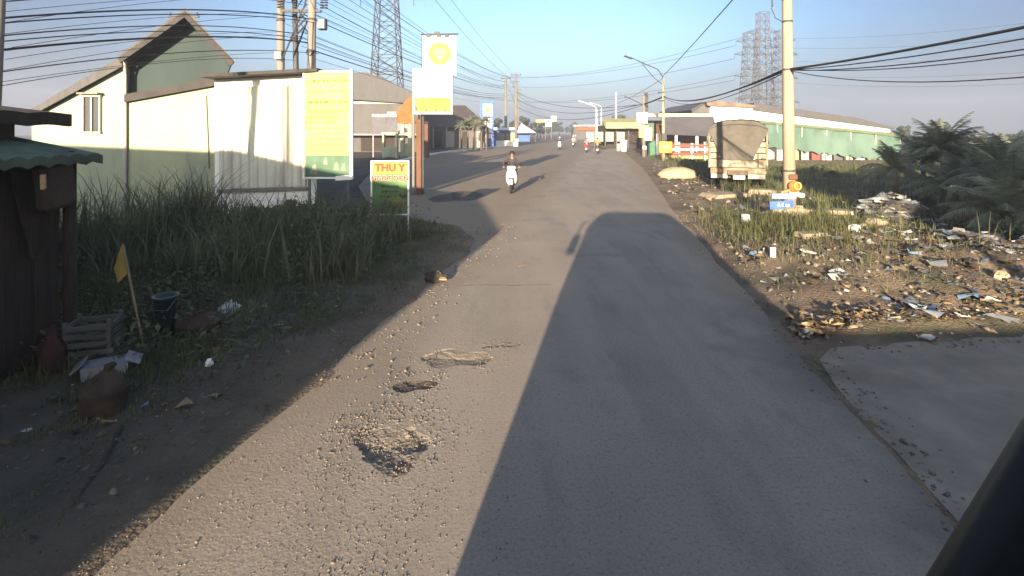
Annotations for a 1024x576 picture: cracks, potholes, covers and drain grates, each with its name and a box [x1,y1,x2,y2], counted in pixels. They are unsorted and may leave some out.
pothole [392,380,438,393]
pothole [351,424,432,477]
